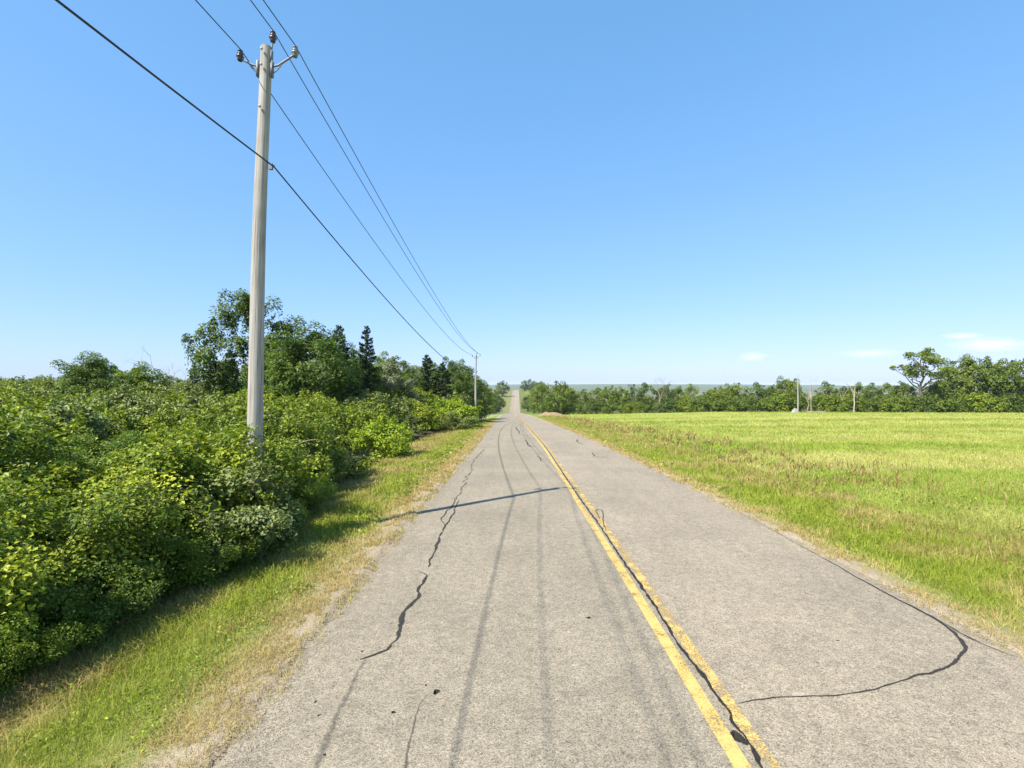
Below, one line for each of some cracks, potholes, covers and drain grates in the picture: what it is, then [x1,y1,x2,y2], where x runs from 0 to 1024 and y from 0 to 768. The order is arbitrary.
crack [440,453,481,526]
